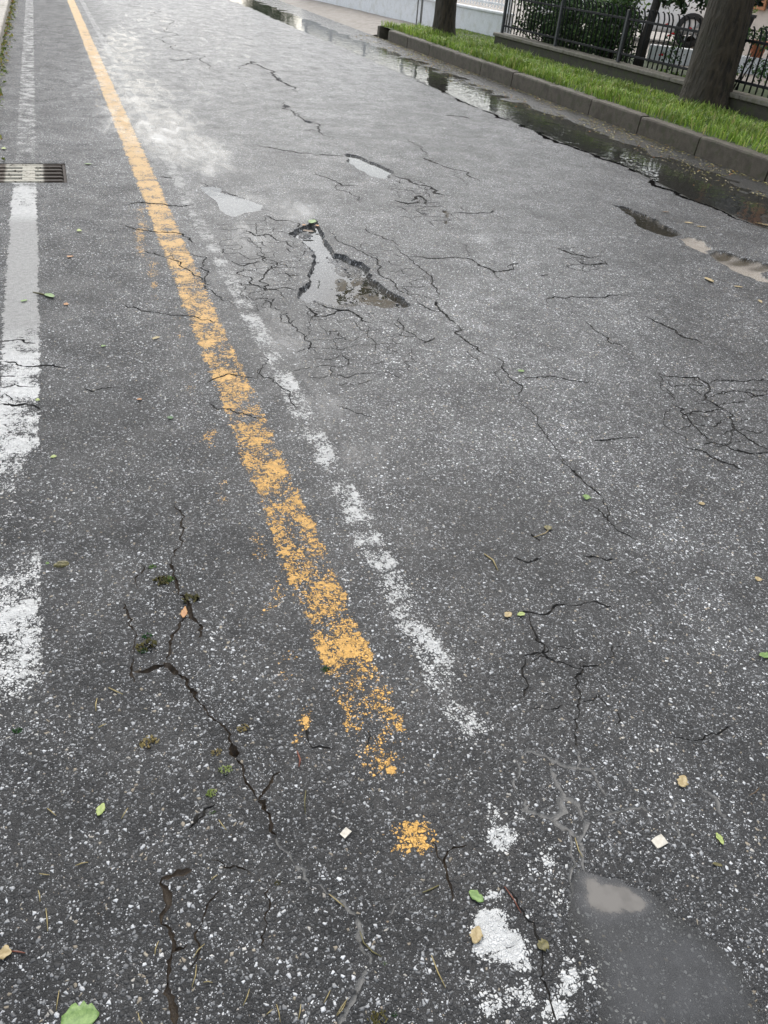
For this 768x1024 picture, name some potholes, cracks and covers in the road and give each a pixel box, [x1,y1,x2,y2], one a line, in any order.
pothole [344,154,394,179]
pothole [288,218,411,309]
drain grate [0,164,67,183]
crack [164,177,637,540]
crack [123,503,466,1024]
pothole [614,205,682,237]
crack [238,61,325,136]
crack [120,224,232,304]
crack [657,372,768,470]
crack [125,305,219,323]
crack [508,601,759,1024]
